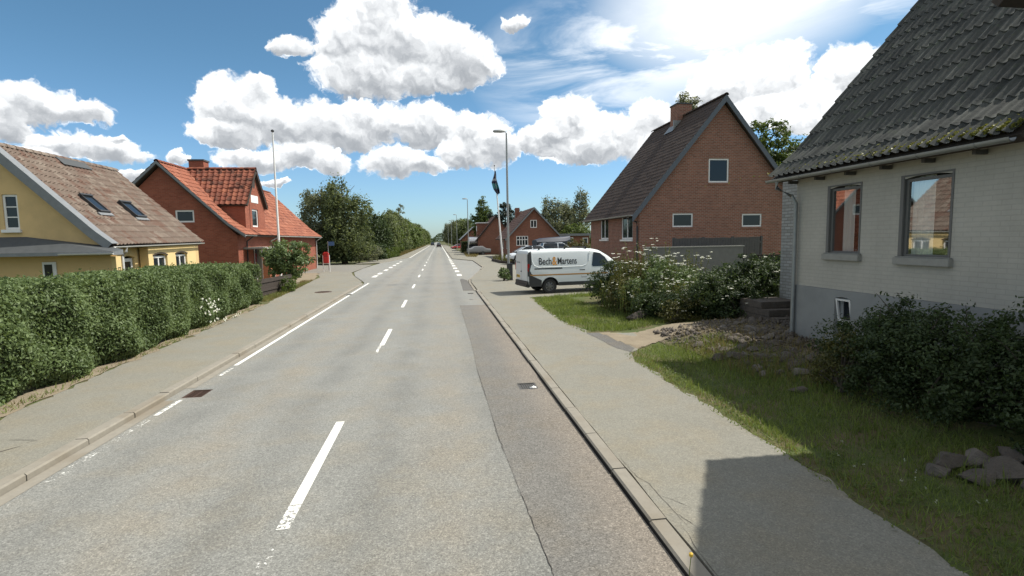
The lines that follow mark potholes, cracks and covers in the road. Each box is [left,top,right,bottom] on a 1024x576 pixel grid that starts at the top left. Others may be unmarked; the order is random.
drain grate [182,389,213,398]
